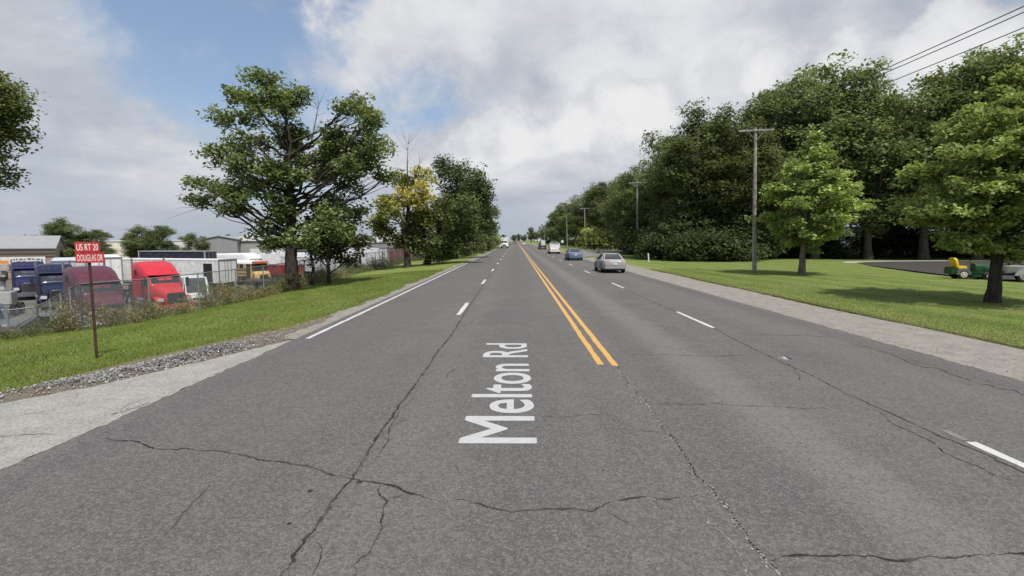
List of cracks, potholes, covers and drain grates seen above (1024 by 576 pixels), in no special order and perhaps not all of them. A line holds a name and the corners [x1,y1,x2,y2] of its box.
crack [771,552,1024,562]
crack [873,408,1023,484]
crack [657,403,835,445]
crack [443,465,752,576]
crack [107,438,432,576]
crack [853,344,1024,395]
